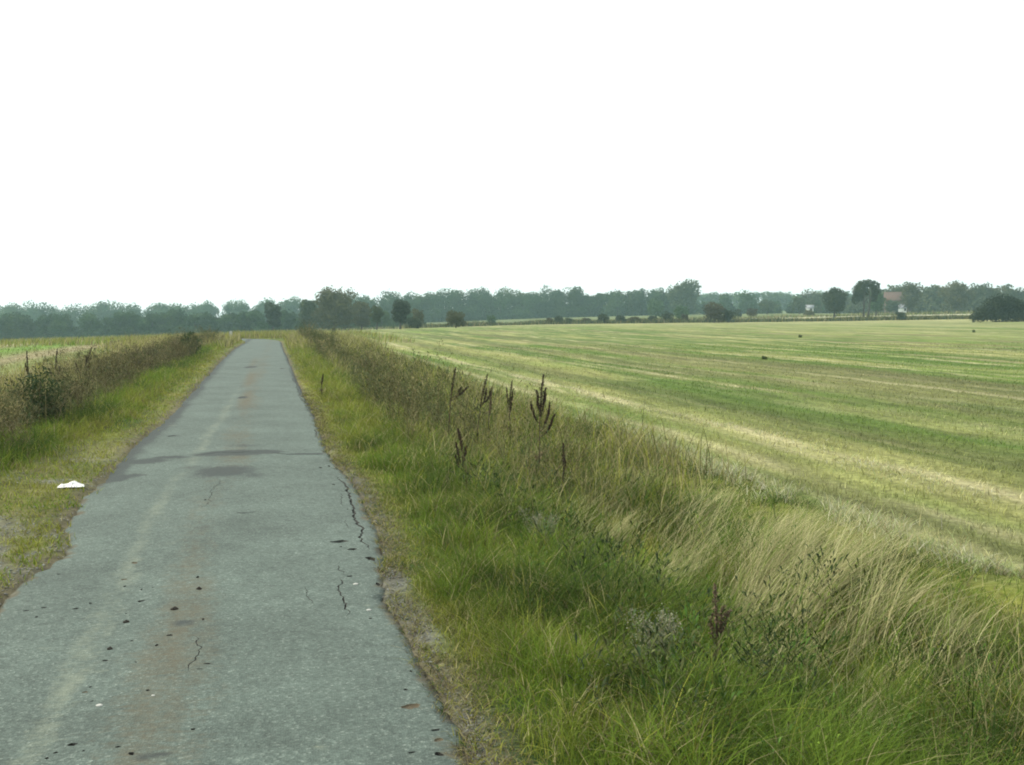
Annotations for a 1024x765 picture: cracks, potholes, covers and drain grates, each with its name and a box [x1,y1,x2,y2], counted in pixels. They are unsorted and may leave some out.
crack [334,476,369,548]
crack [337,565,350,616]
